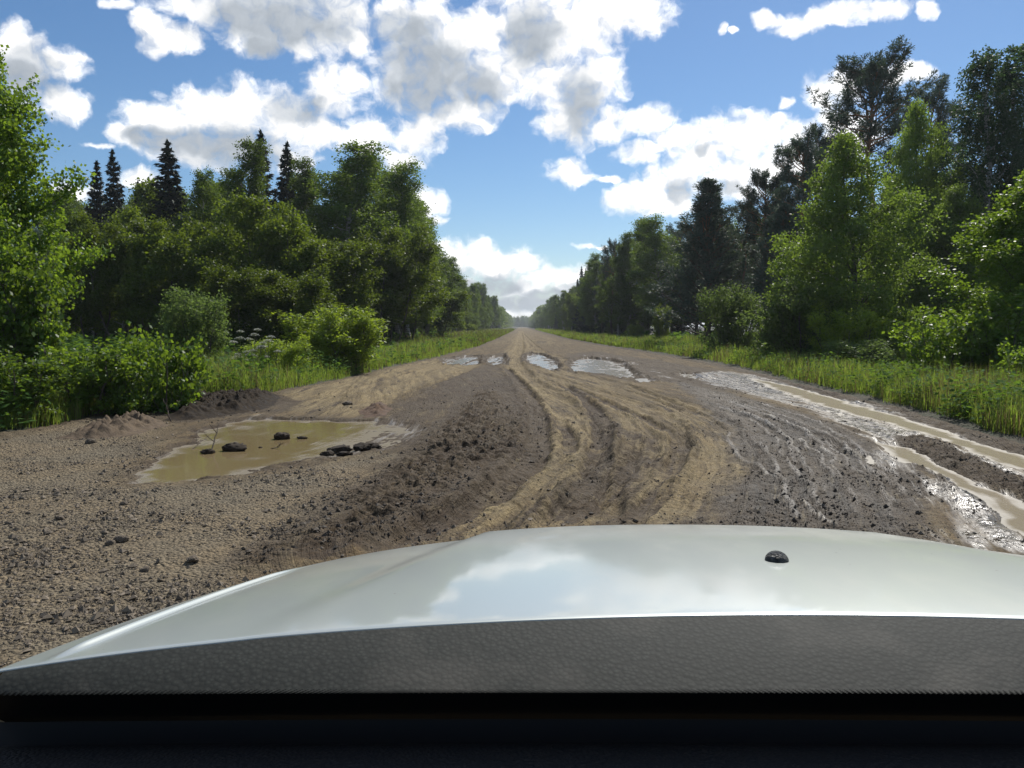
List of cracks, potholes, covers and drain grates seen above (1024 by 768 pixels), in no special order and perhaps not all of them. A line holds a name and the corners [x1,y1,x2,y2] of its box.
pothole [672,371,710,380]
pothole [107,414,443,491]
pothole [628,375,666,383]
pothole [563,355,649,379]
pothole [519,351,565,371]
pothole [484,352,512,366]
pothole [435,354,487,366]
